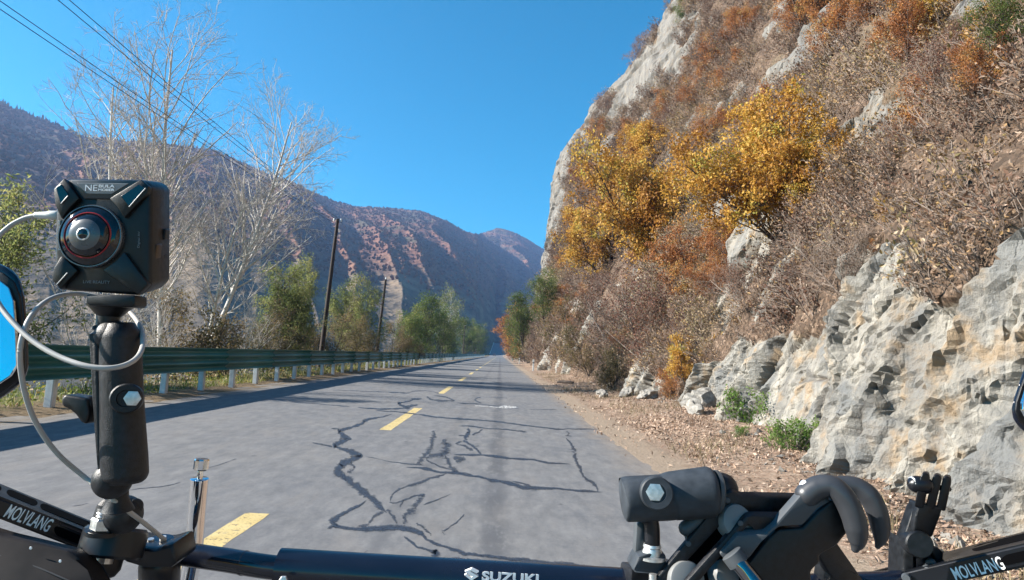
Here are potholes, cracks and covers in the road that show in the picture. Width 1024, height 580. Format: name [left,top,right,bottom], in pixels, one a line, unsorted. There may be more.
crack [295,390,596,454]
